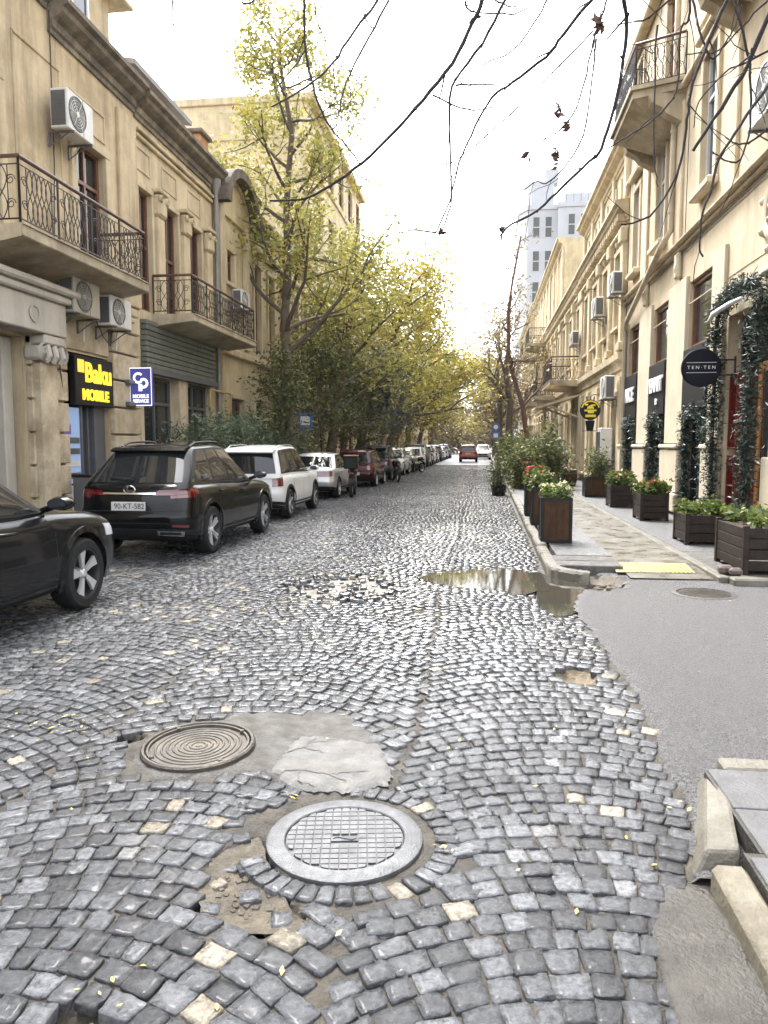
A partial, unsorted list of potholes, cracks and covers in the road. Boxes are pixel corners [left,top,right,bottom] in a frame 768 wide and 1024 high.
pothole [556,670,596,687]
pothole [274,571,406,604]
manhole cover [266,800,423,886]
pothole [191,837,308,937]
manhole cover [140,721,256,773]
manhole cover [671,587,738,600]
